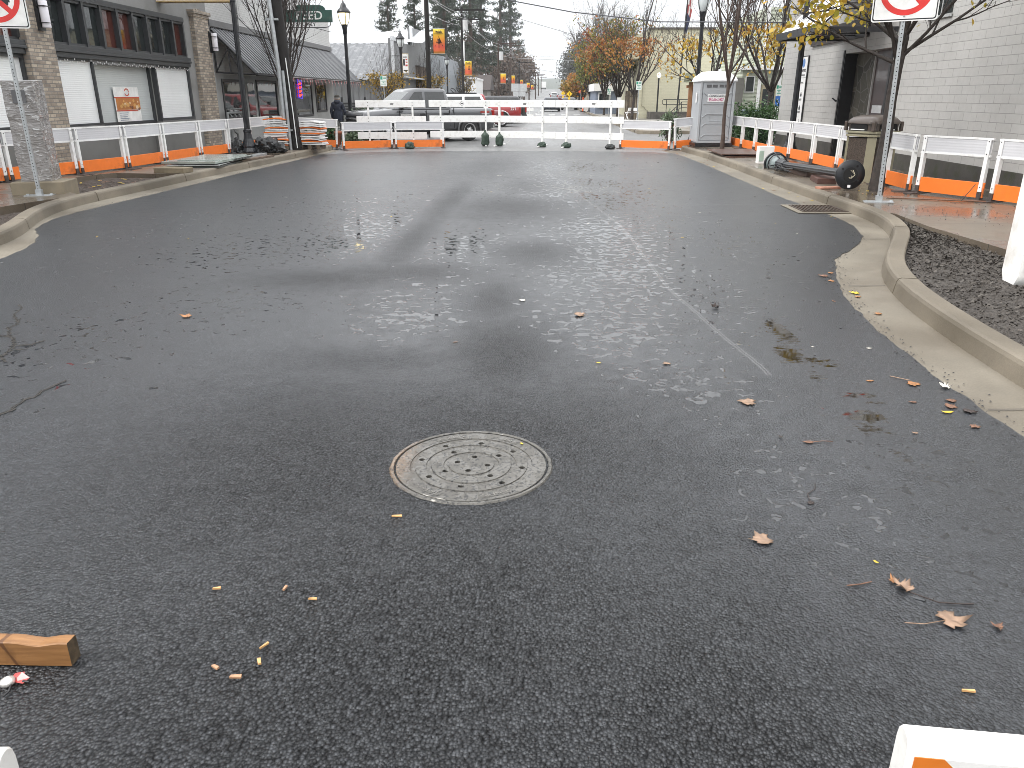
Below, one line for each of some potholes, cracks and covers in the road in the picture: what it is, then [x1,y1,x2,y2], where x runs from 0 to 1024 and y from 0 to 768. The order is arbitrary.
drain grate [781,204,852,214]
crack [0,305,45,362]
crack [0,380,66,415]
manhole cover [389,431,553,505]
